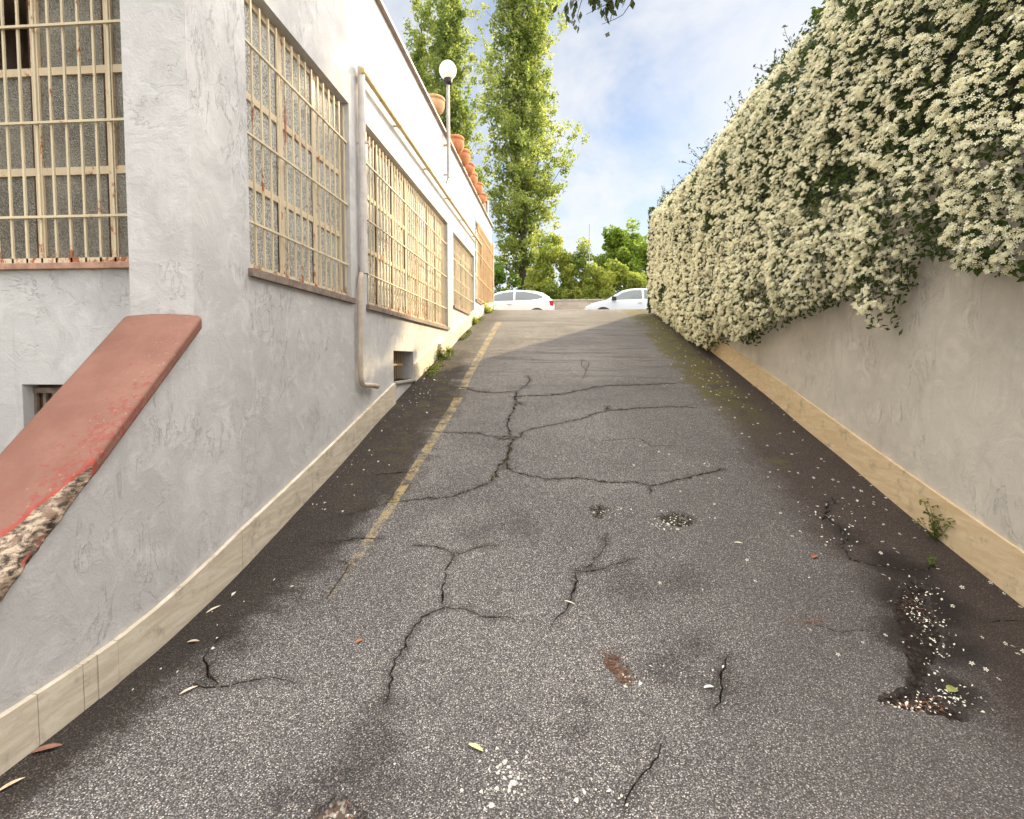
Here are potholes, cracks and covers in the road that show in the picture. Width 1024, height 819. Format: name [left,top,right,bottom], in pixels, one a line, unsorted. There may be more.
pothole [876,576,970,723]
pothole [308,791,369,819]
crack [623,743,662,810]
crack [321,538,526,703]
crack [194,633,295,688]
crack [336,359,720,516]
crack [713,655,729,711]
pothole [653,511,697,527]
pothole [589,504,612,519]
crack [550,533,635,627]
crack [822,497,934,571]
